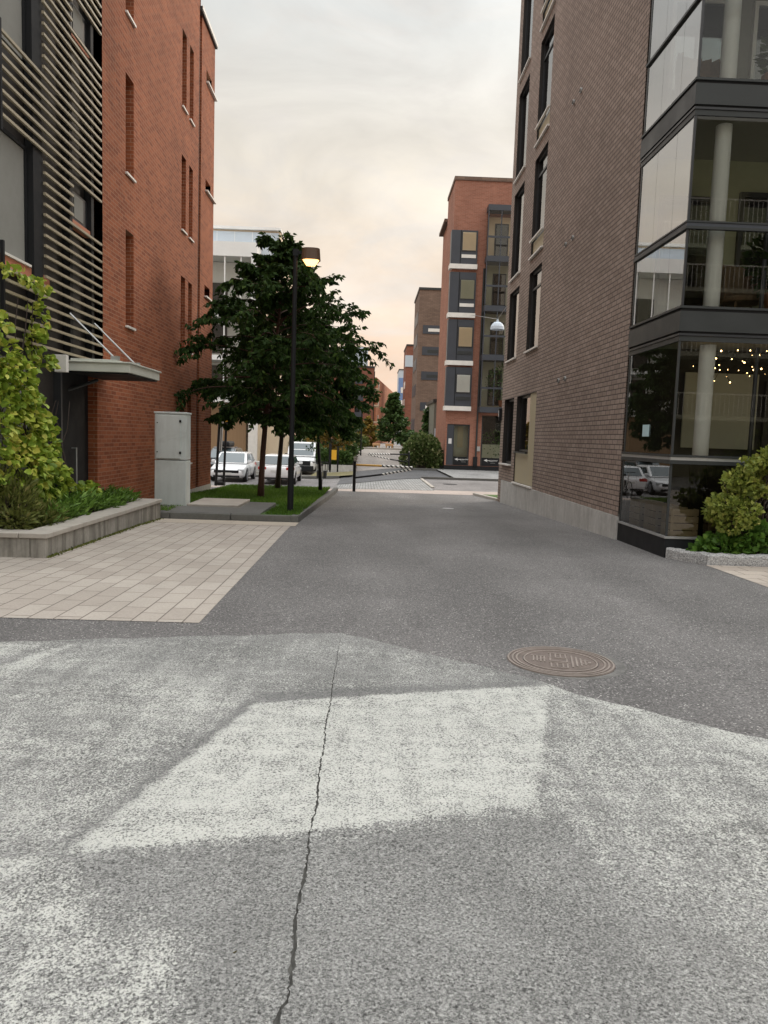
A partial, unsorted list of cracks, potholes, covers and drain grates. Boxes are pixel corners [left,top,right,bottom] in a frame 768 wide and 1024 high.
crack [273,639,341,1024]
manhole cover [507,646,626,680]
